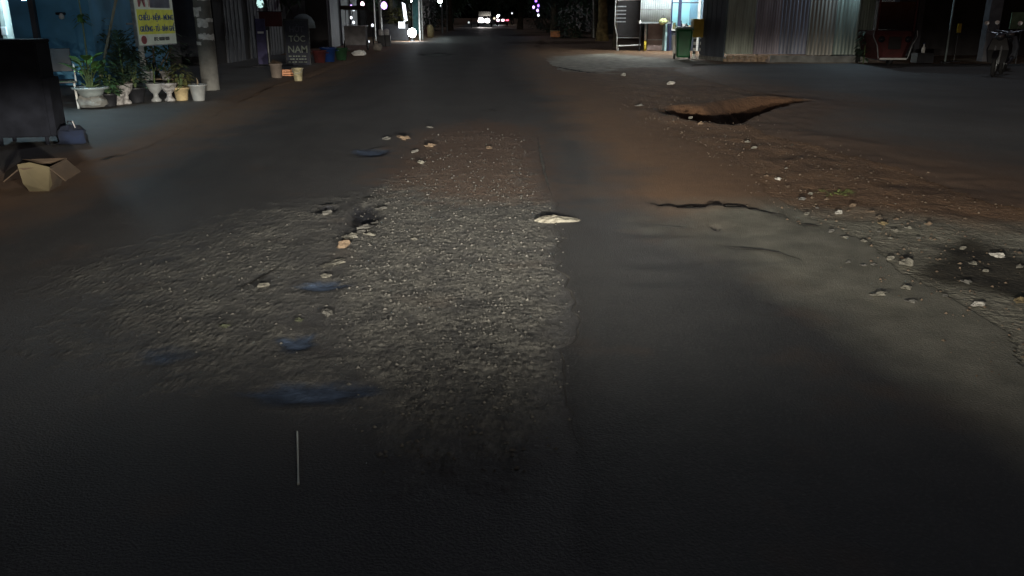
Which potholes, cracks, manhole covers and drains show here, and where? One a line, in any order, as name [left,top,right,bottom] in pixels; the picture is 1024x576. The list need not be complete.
pothole [714,111,767,125]
pothole [923,241,1024,297]
crack [658,205,816,226]
pothole [352,208,379,226]
